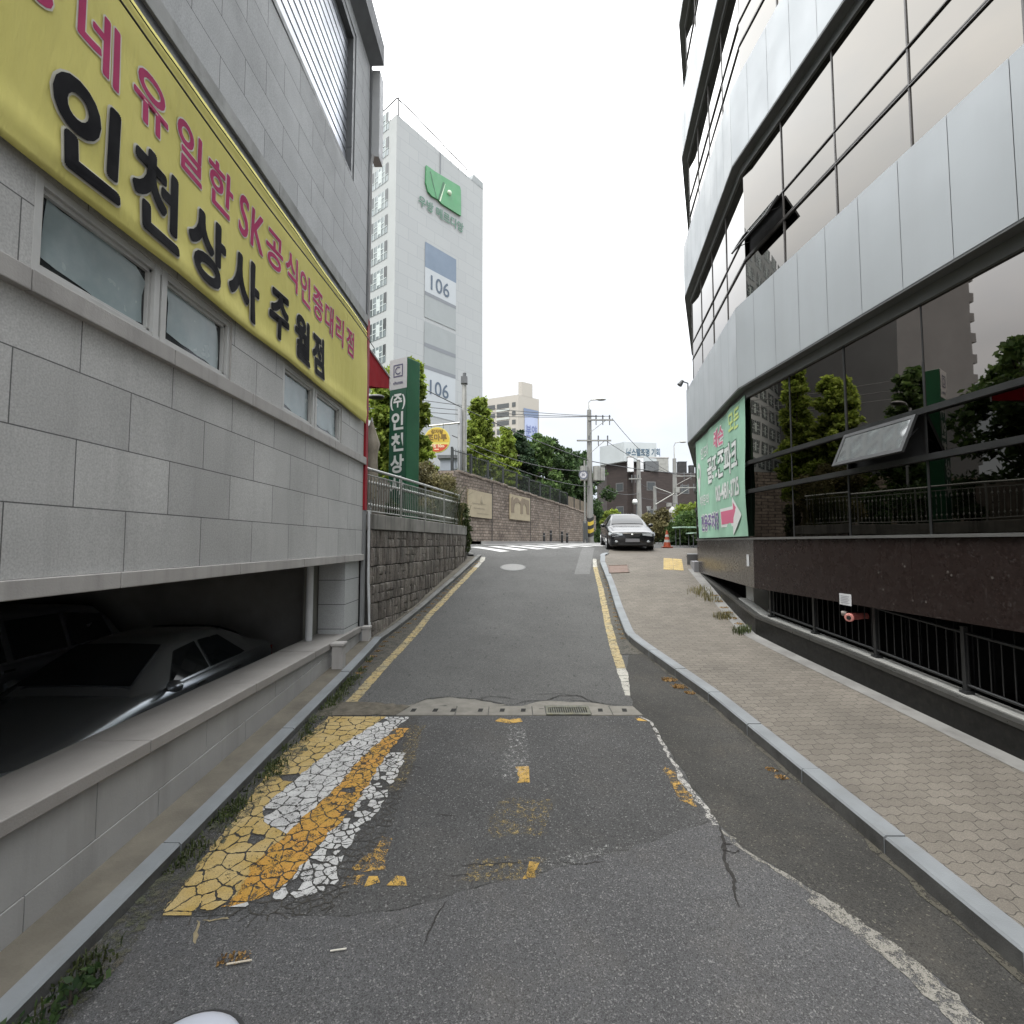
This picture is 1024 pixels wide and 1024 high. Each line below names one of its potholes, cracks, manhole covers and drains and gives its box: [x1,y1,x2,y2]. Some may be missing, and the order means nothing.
crack [451,861,528,876]
manhole cover [608,565,630,573]
crack [412,693,619,705]
crack [423,901,447,946]
crack [719,826,740,907]
drain grate [545,705,591,715]
